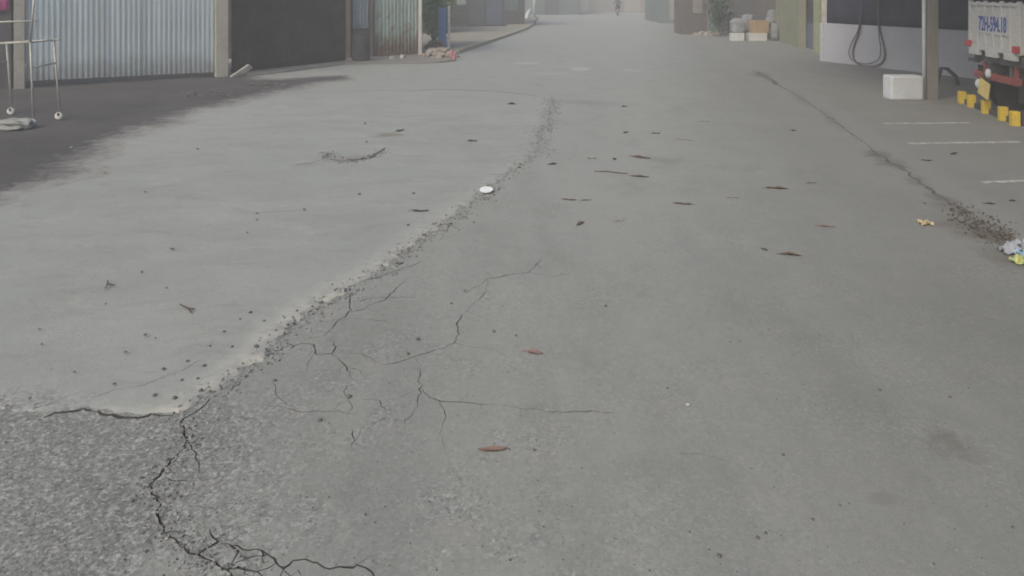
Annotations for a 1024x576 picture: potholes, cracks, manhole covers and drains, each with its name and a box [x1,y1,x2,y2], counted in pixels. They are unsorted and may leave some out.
crack [267,261,616,448]
crack [43,357,375,576]
crack [296,148,385,165]
